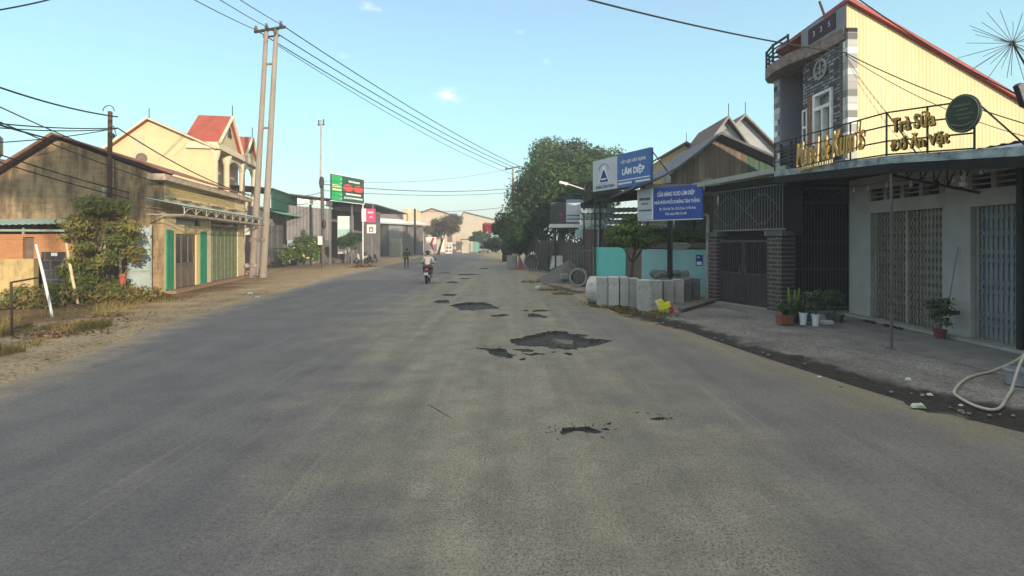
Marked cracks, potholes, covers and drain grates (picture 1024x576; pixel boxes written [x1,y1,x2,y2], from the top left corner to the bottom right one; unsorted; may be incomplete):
pothole [477,347,573,361]
pothole [509,331,611,350]
pothole [450,302,501,311]
pothole [545,422,616,440]
